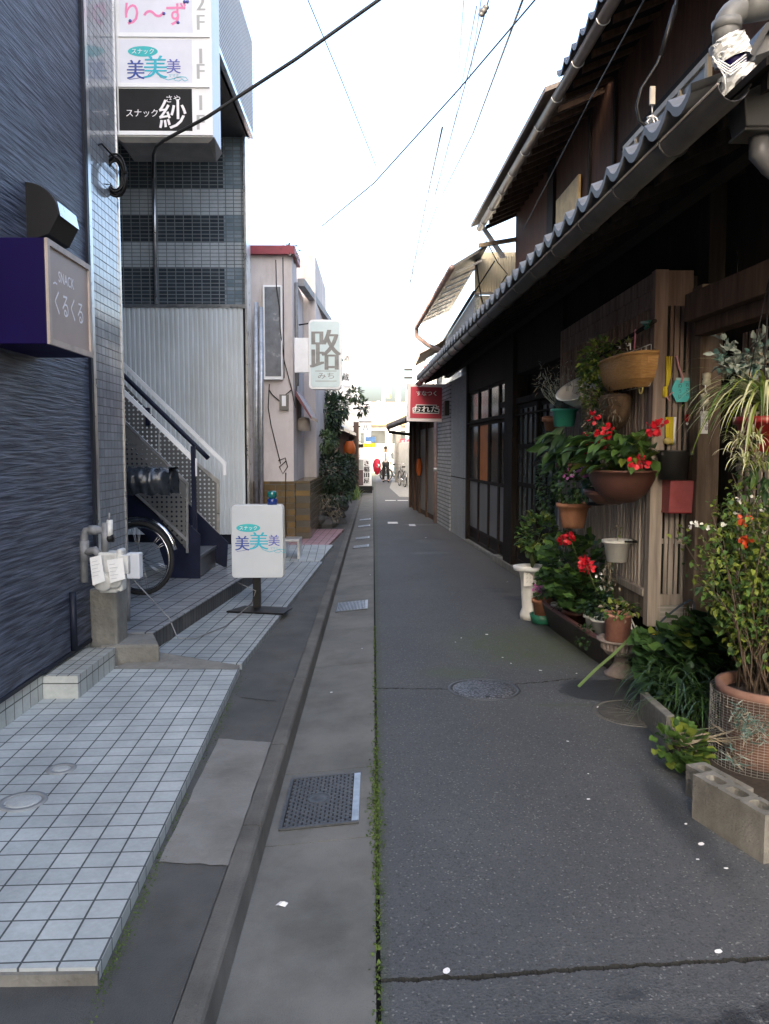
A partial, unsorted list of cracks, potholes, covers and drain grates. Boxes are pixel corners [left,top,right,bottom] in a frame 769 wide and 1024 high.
manhole cover [46,763,77,775]
crack [381,956,769,983]
manhole cover [0,791,48,812]
manhole cover [448,678,521,701]
drain grate [278,771,361,831]
drain grate [335,599,368,613]
manhole cover [592,699,648,728]
